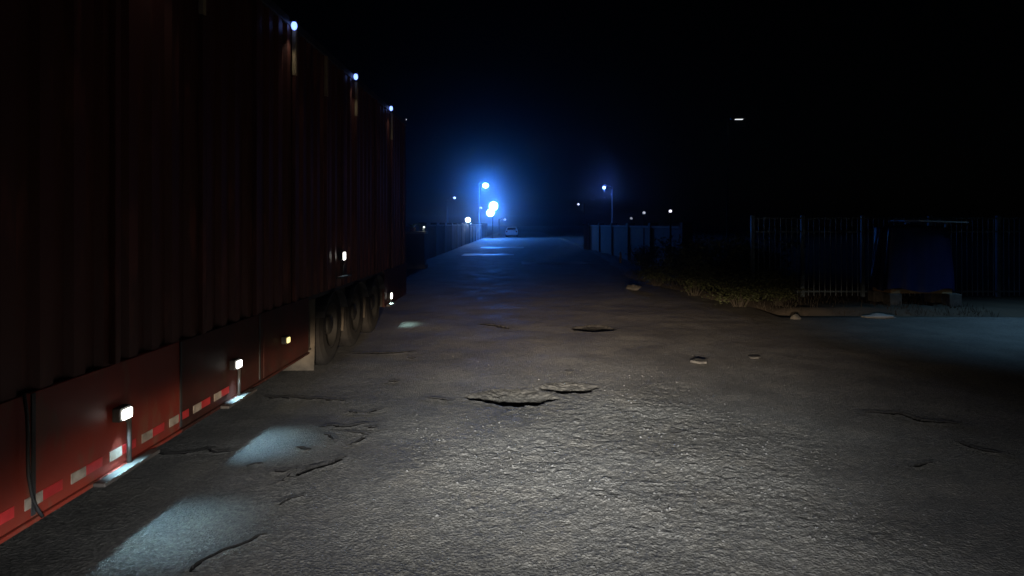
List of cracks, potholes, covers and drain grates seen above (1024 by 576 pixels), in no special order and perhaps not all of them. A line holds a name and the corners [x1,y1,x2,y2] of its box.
pothole [457,386,571,410]
crack [178,529,278,576]
pothole [568,324,622,333]
crack [154,395,391,509]
crack [854,409,1013,470]
pothole [534,381,606,396]
